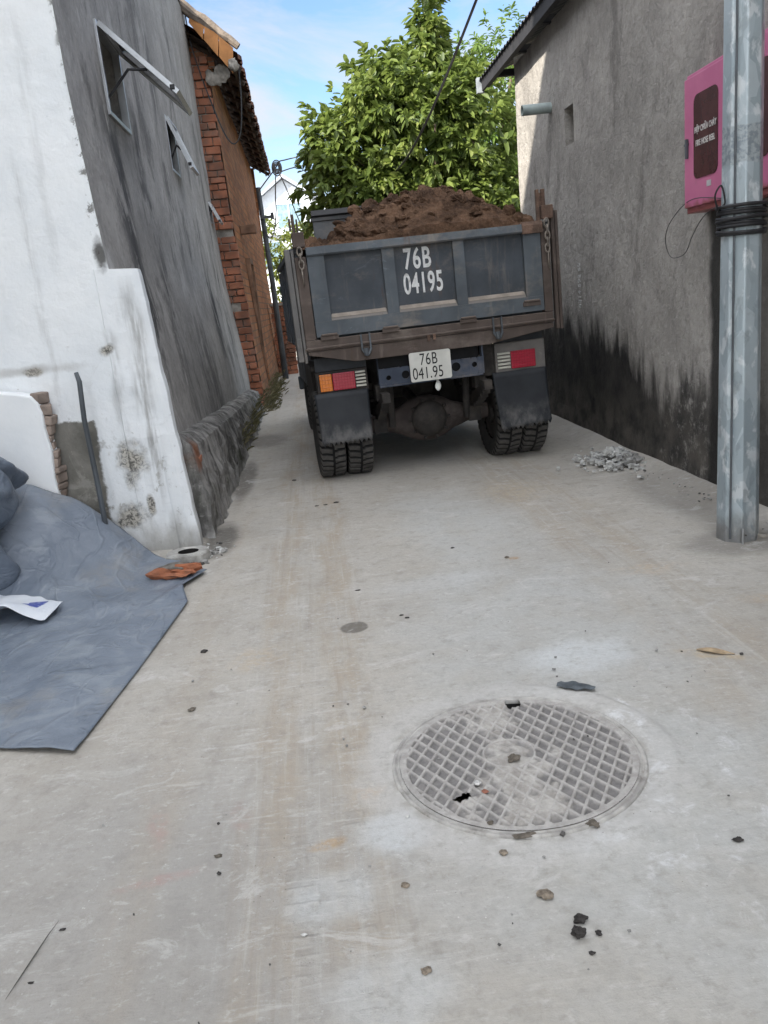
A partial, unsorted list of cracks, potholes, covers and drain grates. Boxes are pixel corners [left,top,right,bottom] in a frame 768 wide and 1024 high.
manhole cover [392,696,649,839]
